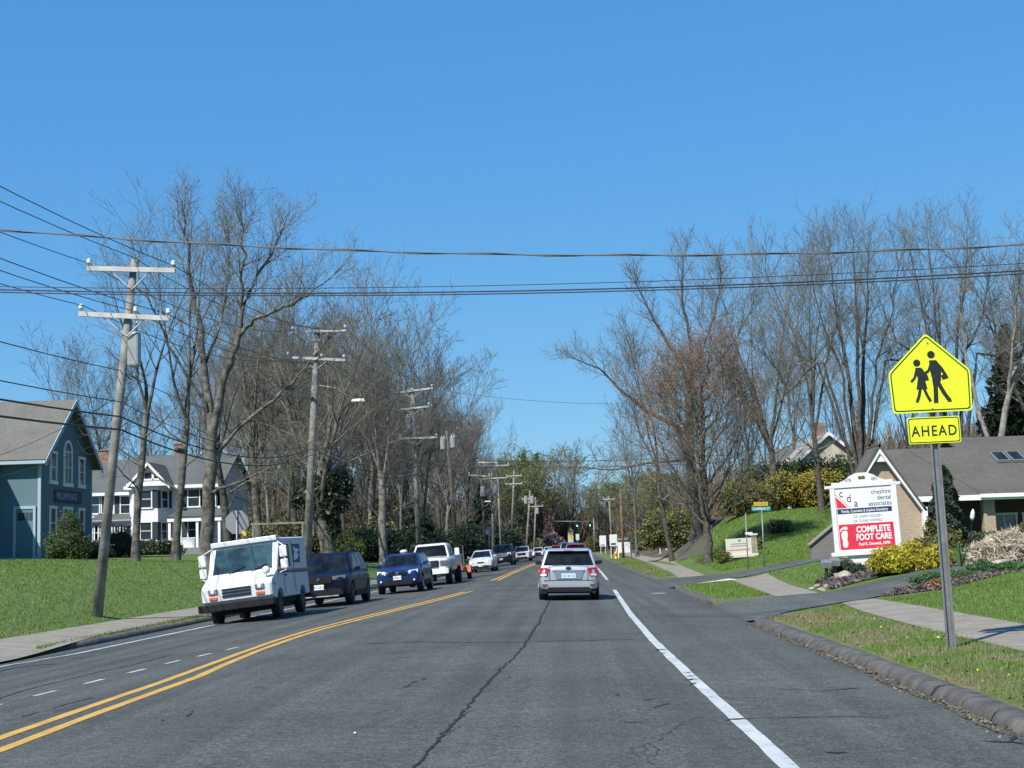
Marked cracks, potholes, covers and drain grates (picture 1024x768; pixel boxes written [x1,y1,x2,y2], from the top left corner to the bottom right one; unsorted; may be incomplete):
crack [614,693,703,764]
crack [364,601,633,768]
